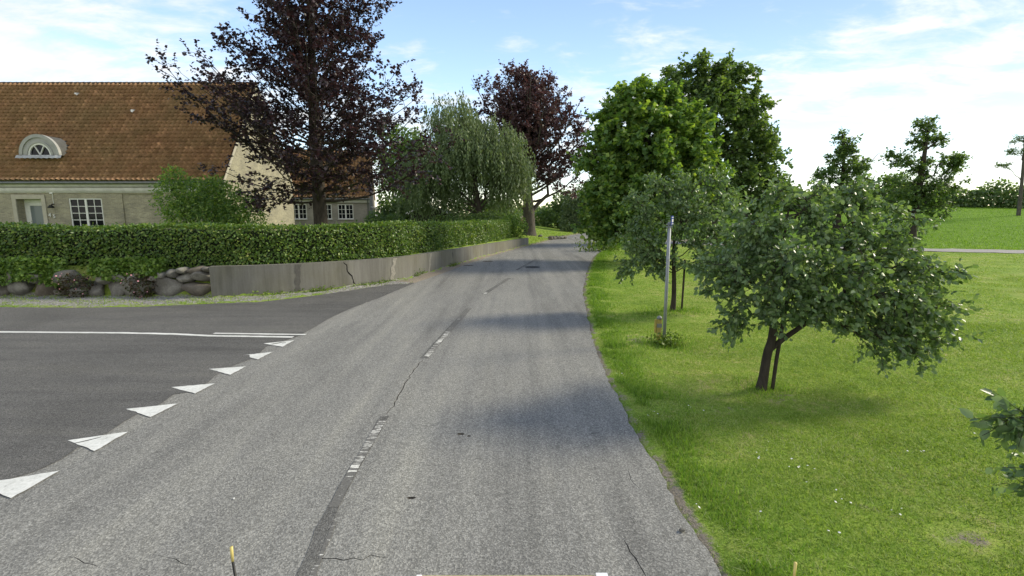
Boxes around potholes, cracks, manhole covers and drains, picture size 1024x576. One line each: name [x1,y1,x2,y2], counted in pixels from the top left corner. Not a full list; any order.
crack [387,361,422,413]
